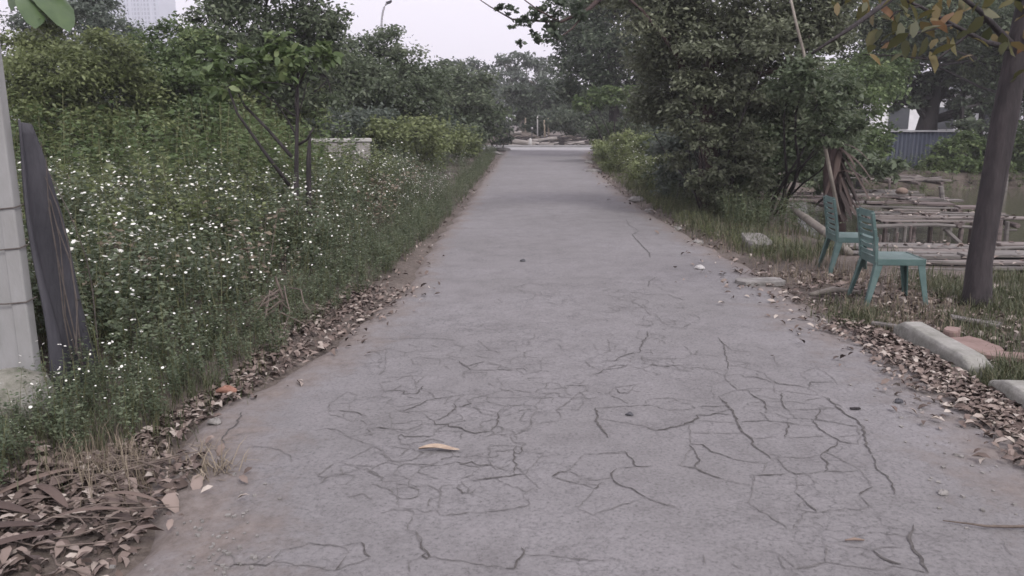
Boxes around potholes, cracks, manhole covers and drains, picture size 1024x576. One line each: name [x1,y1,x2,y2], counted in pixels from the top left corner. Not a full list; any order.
crack [318,383,635,571]
crack [357,324,575,385]
crack [221,413,292,462]
crack [366,351,425,394]
crack [215,542,371,570]
crack [536,338,895,529]
crack [770,525,1012,573]
